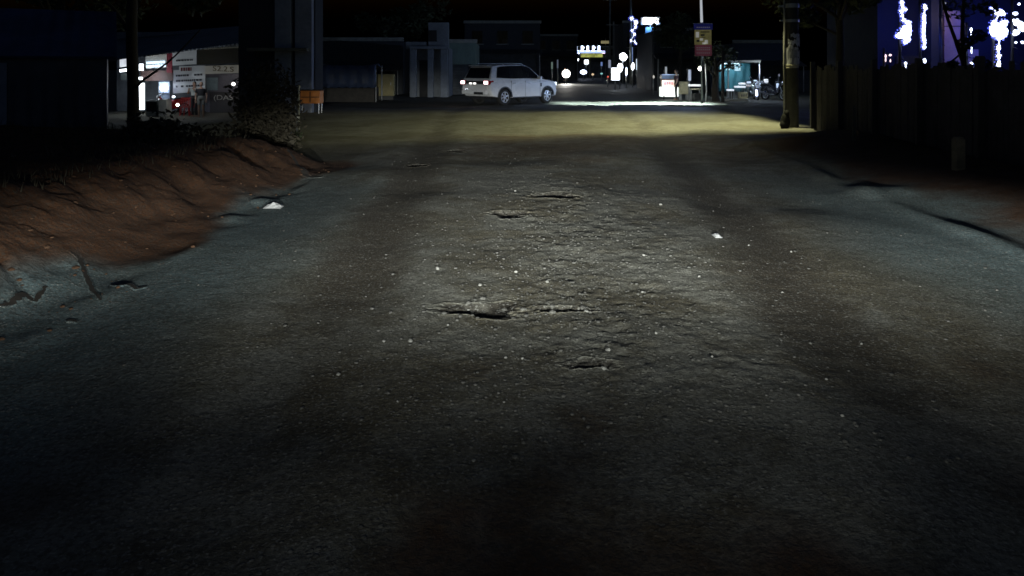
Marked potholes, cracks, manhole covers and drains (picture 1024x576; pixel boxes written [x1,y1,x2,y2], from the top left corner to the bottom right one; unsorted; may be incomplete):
pothole [480,209,535,220]
pothole [521,191,587,200]
crack [0,285,79,324]
pothole [556,356,625,370]
pothole [422,299,542,321]
crack [69,251,148,301]
